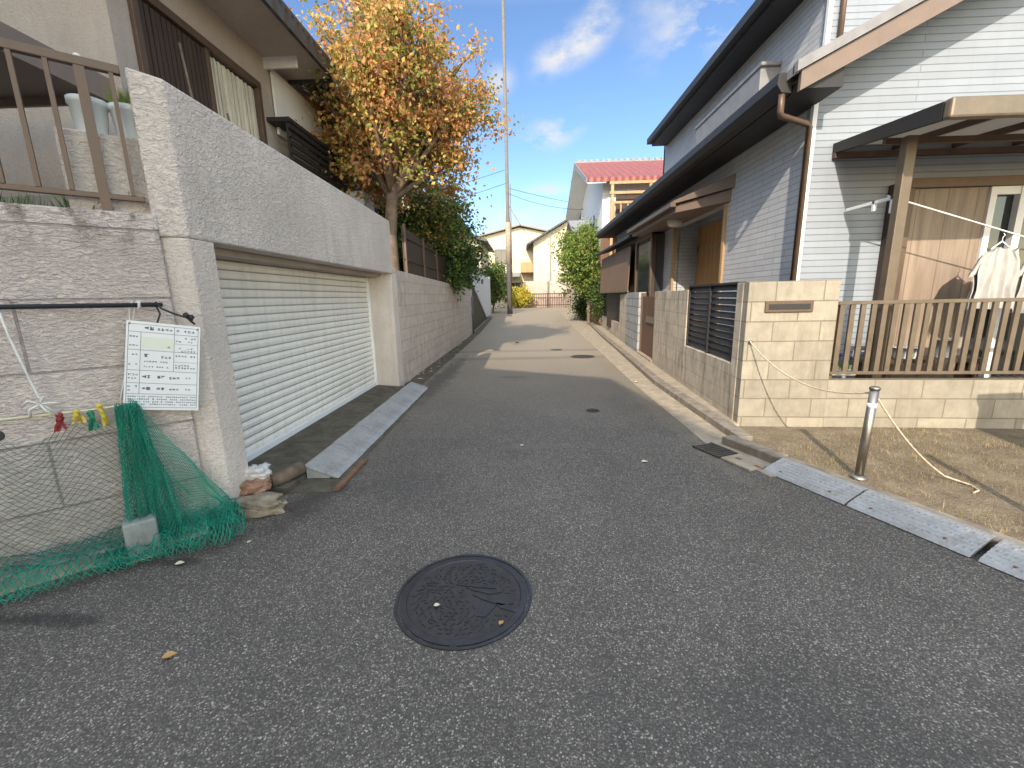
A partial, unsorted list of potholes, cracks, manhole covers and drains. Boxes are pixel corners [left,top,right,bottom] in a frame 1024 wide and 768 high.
drain grate [692,442,738,459]
manhole cover [394,554,532,651]
